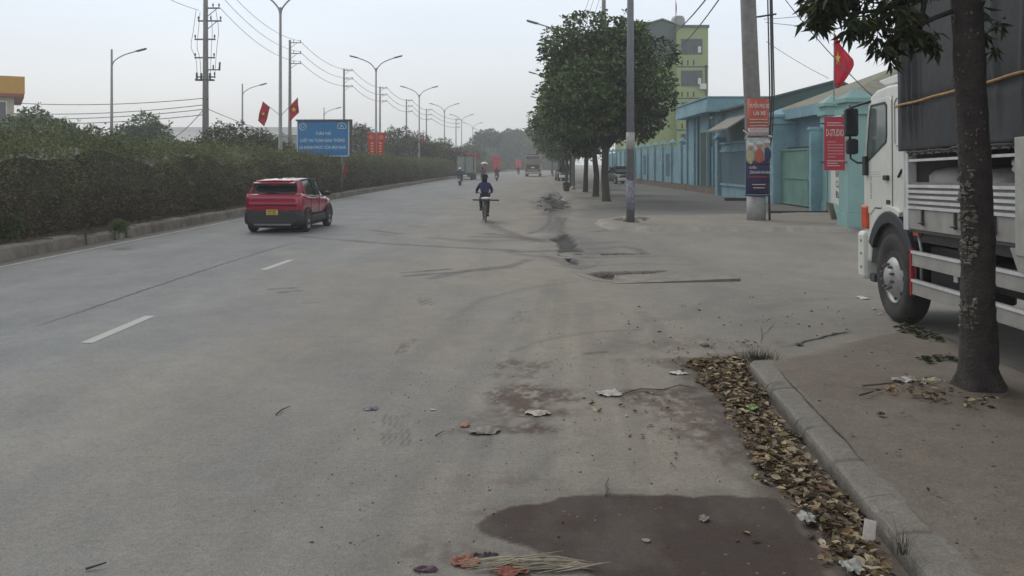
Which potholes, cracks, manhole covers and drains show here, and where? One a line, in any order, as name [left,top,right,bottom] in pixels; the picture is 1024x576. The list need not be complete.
pothole [576,270,676,282]
pothole [529,192,581,212]
pothole [536,233,601,259]
